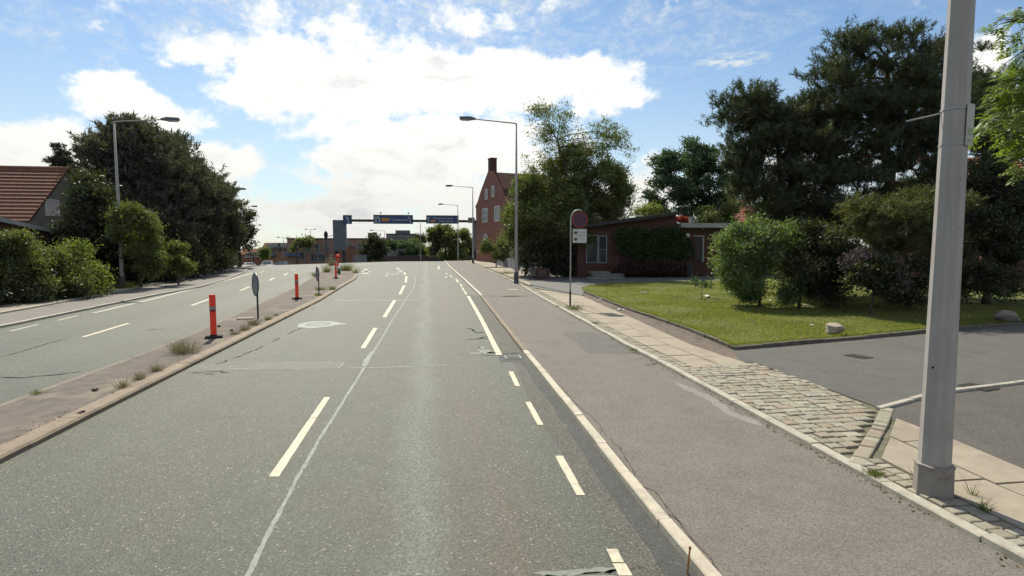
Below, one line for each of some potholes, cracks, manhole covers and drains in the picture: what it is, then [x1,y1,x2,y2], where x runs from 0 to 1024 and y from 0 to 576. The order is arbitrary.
crack [192,327,303,373]
drain grate [957,383,1000,391]
